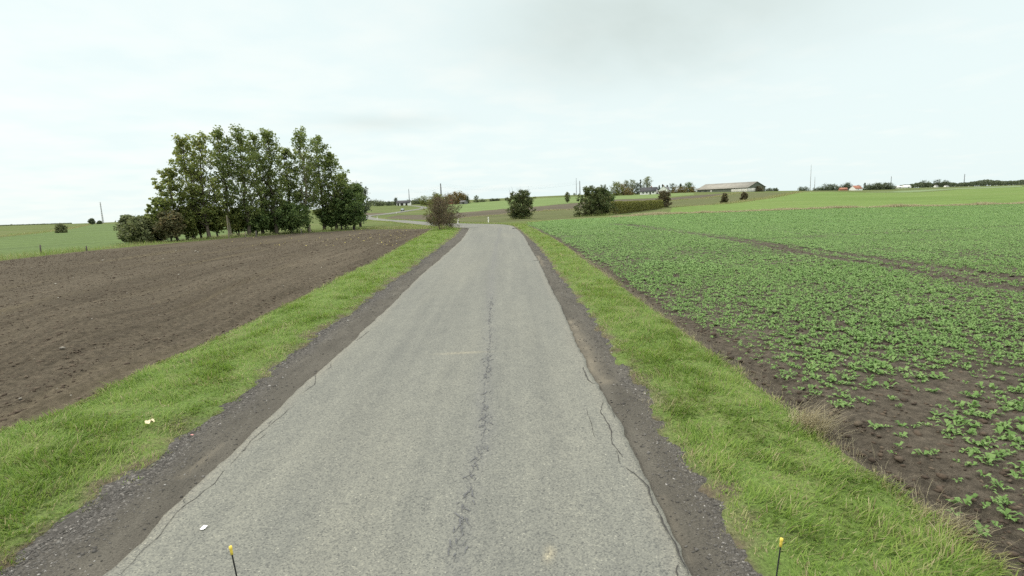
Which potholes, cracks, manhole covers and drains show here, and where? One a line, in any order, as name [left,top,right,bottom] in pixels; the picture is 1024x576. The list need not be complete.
crack [586,403,689,576]
crack [124,406,293,570]
